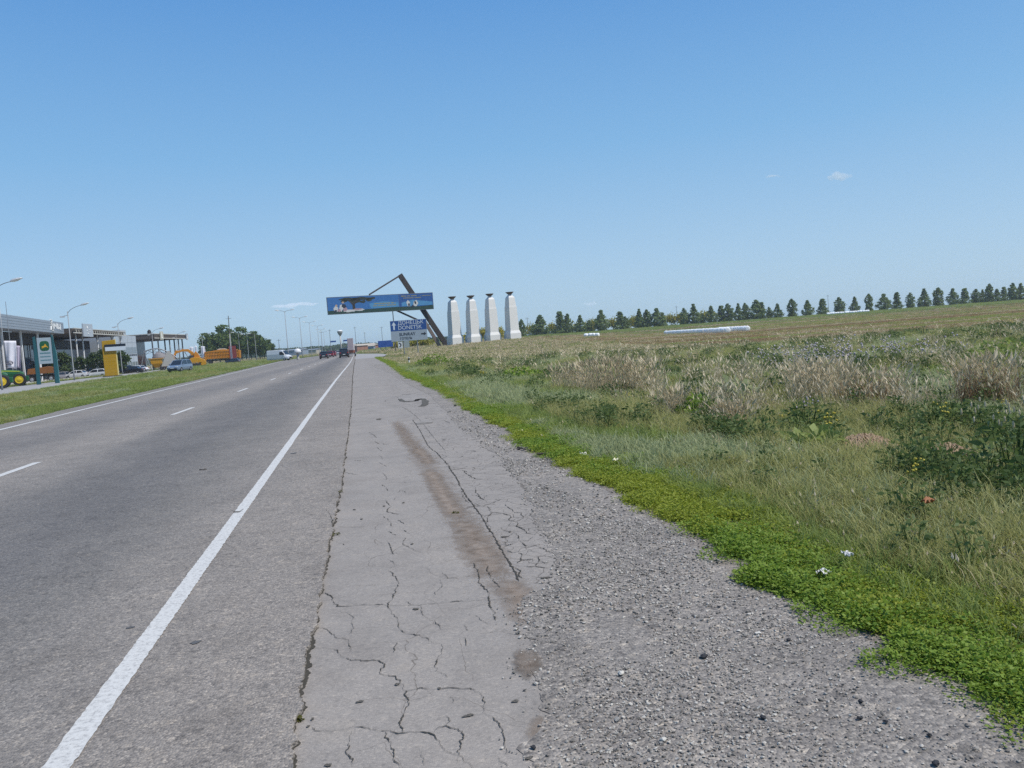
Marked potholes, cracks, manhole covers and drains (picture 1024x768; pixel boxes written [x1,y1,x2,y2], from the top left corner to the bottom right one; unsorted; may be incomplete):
crack [312,406,551,766]
